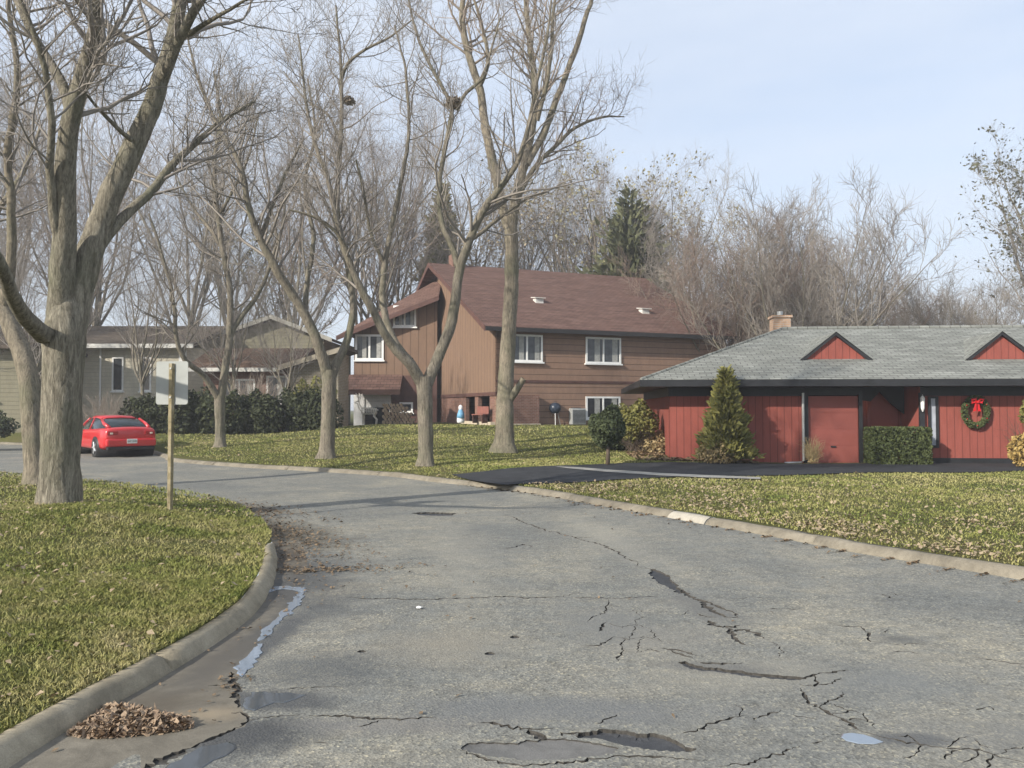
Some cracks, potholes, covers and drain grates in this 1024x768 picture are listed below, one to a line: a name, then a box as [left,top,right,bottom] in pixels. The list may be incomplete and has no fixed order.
crack [511,516,647,569]
pothole [461,738,619,760]
crack [144,672,433,768]
crack [834,624,928,655]
crack [684,670,1024,768]
pothole [647,568,684,594]
pothole [574,729,697,752]
